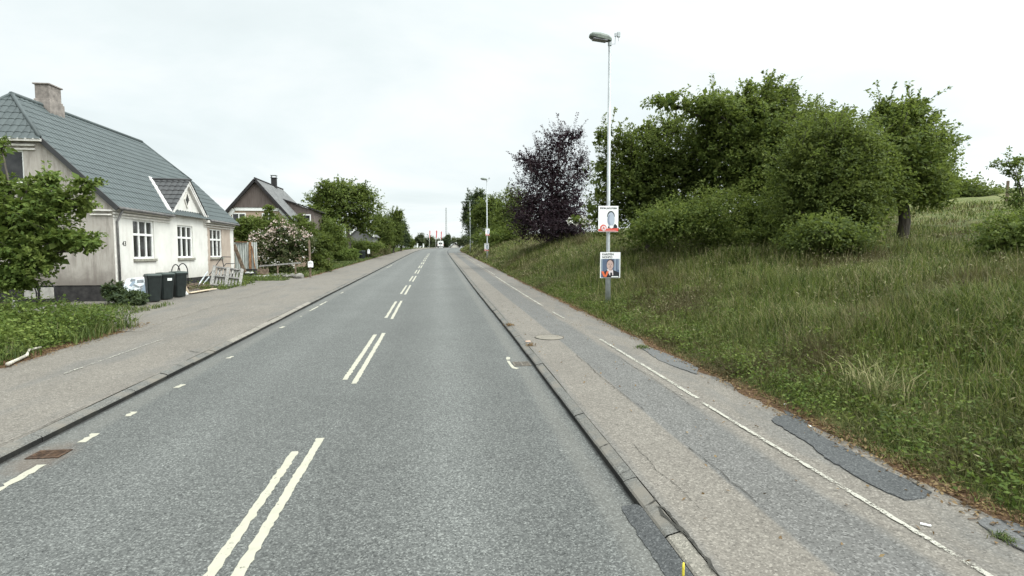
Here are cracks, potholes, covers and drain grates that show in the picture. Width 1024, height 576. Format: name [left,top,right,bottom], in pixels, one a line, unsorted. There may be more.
drain grate [24,449,73,460]
